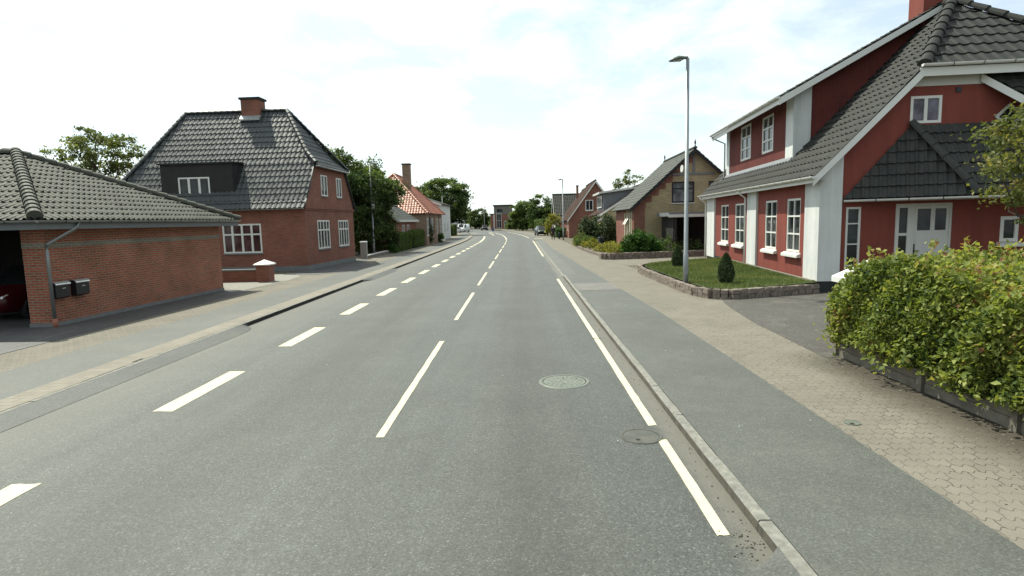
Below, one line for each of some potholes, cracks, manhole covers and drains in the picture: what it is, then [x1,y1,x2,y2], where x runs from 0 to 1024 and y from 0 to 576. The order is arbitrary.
manhole cover [539,374,590,389]
manhole cover [620,428,663,444]
